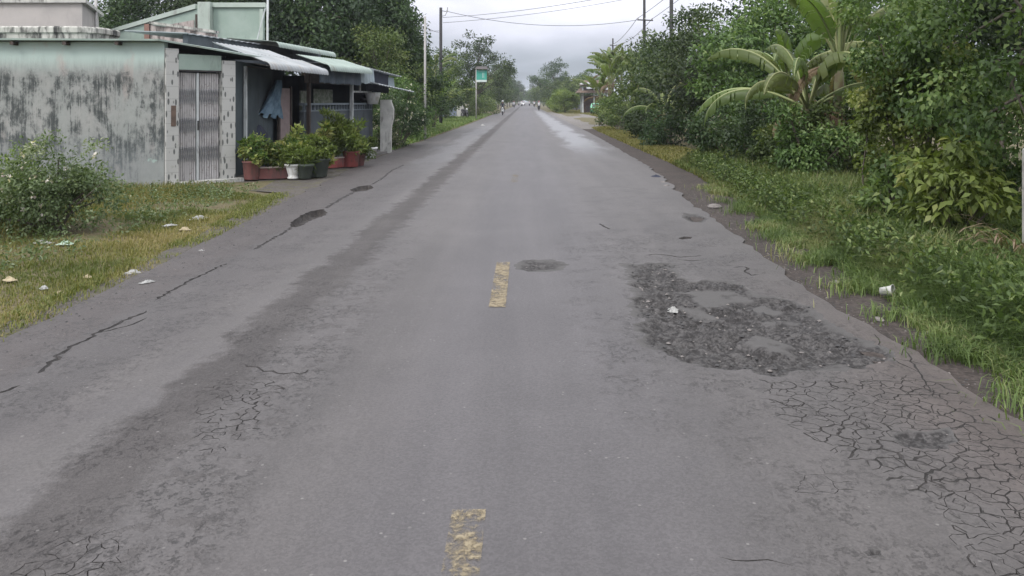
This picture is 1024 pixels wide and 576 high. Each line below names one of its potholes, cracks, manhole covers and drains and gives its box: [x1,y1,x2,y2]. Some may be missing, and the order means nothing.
pothole [681,213,708,222]
crack [37,264,227,374]
pothole [514,259,569,272]
crack [325,192,355,208]
crack [761,334,1024,576]
pothole [619,262,896,377]
crack [254,227,291,249]
crack [10,527,131,576]
pothole [290,209,327,227]
crack [190,365,308,453]
